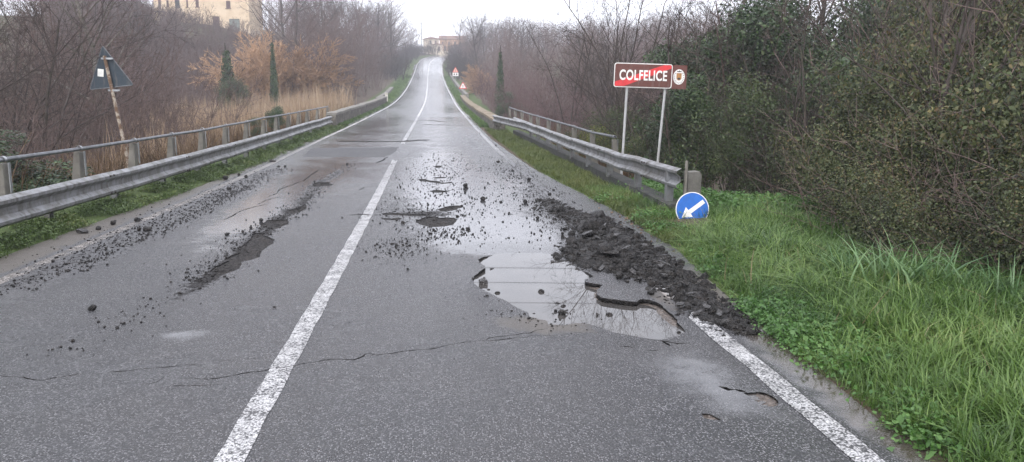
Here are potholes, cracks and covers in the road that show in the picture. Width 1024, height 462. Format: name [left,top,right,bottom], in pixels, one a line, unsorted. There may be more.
pothole [416,216,457,227]
crack [224,169,320,220]
pothole [260,219,289,228]
pothole [473,255,685,340]
pothole [211,233,275,278]
crack [0,329,555,386]
